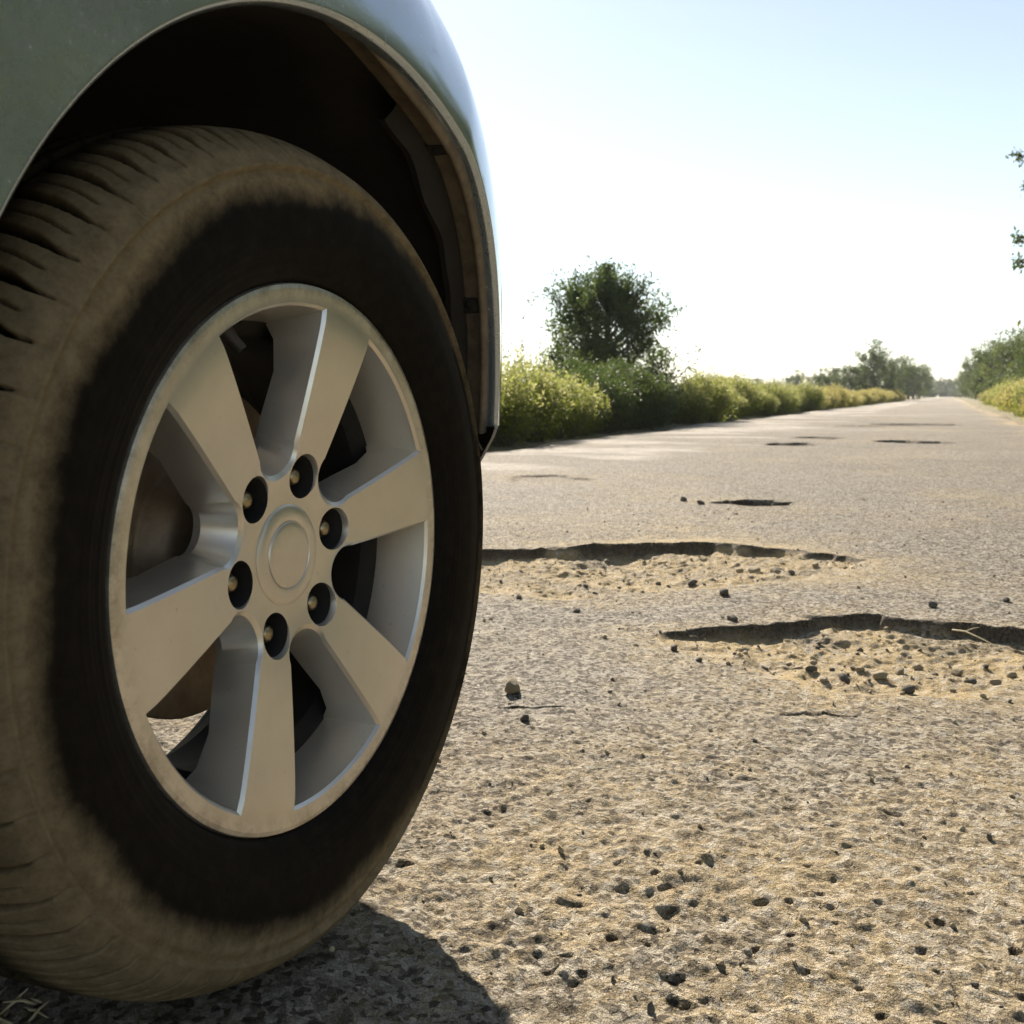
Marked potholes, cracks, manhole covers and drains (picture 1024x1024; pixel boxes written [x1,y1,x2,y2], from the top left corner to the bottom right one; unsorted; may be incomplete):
pothole [479,541,868,601]
pothole [503,474,598,483]
pothole [652,613,1024,701]
